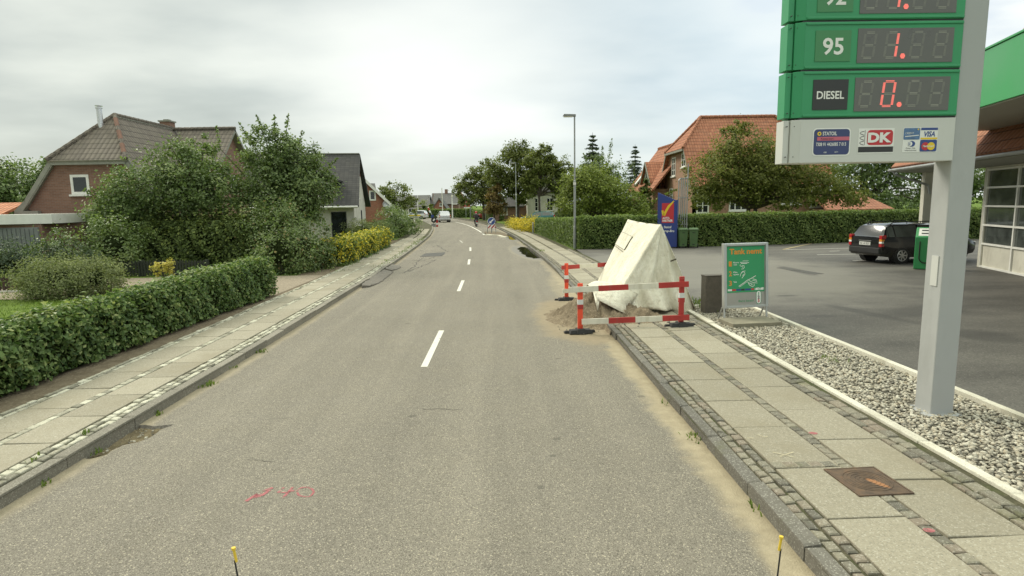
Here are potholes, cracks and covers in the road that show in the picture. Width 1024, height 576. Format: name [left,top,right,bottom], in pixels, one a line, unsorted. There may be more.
manhole cover [824,466,914,497]
pothole [88,424,173,459]
pothole [517,247,540,259]
